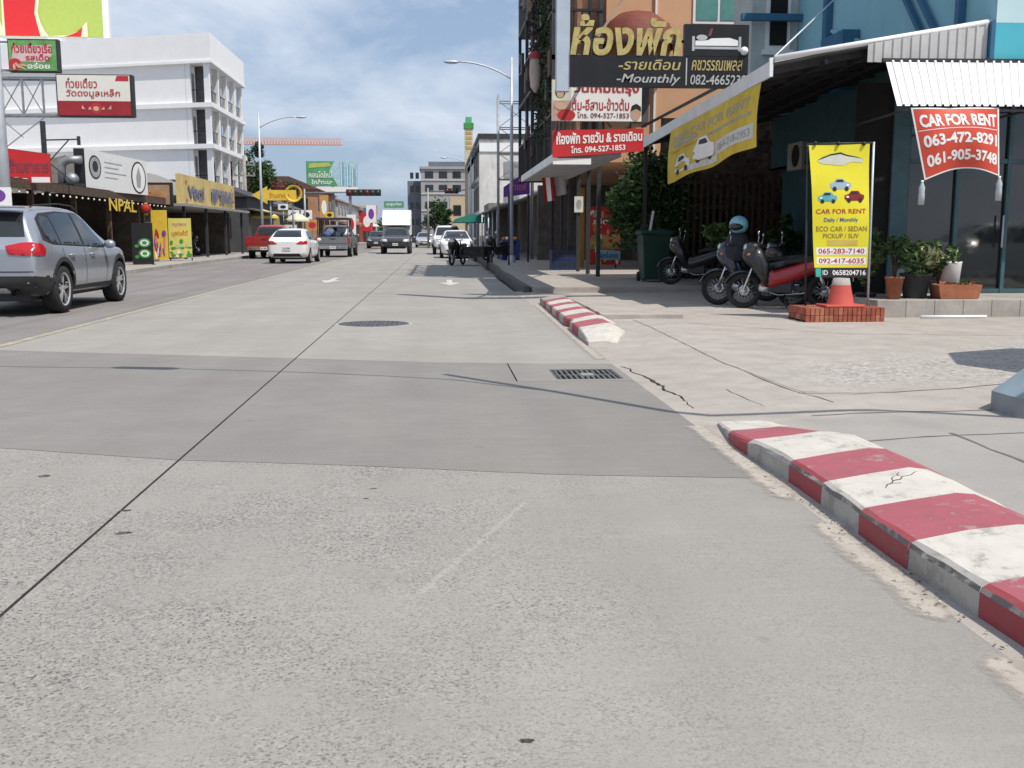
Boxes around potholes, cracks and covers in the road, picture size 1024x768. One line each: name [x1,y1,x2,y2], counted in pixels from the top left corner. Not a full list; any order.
crack [621,366,693,408]
drain grate [549,369,624,379]
